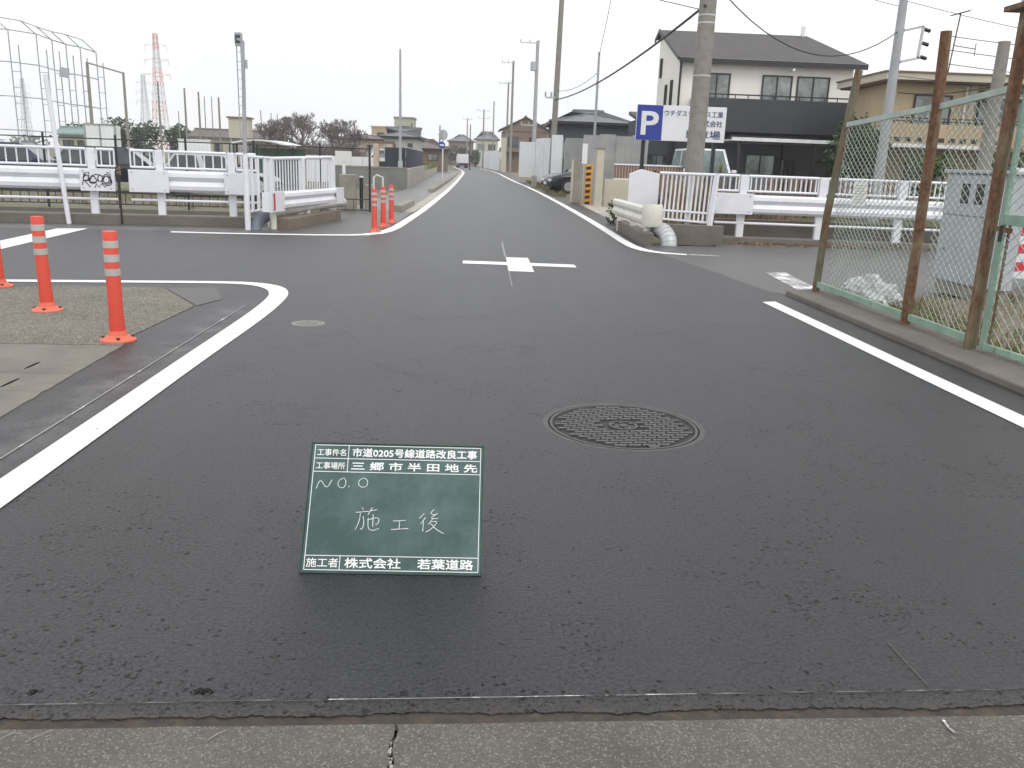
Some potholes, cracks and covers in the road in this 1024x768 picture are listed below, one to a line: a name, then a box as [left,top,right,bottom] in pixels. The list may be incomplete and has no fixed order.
manhole cover [543,403,705,452]
